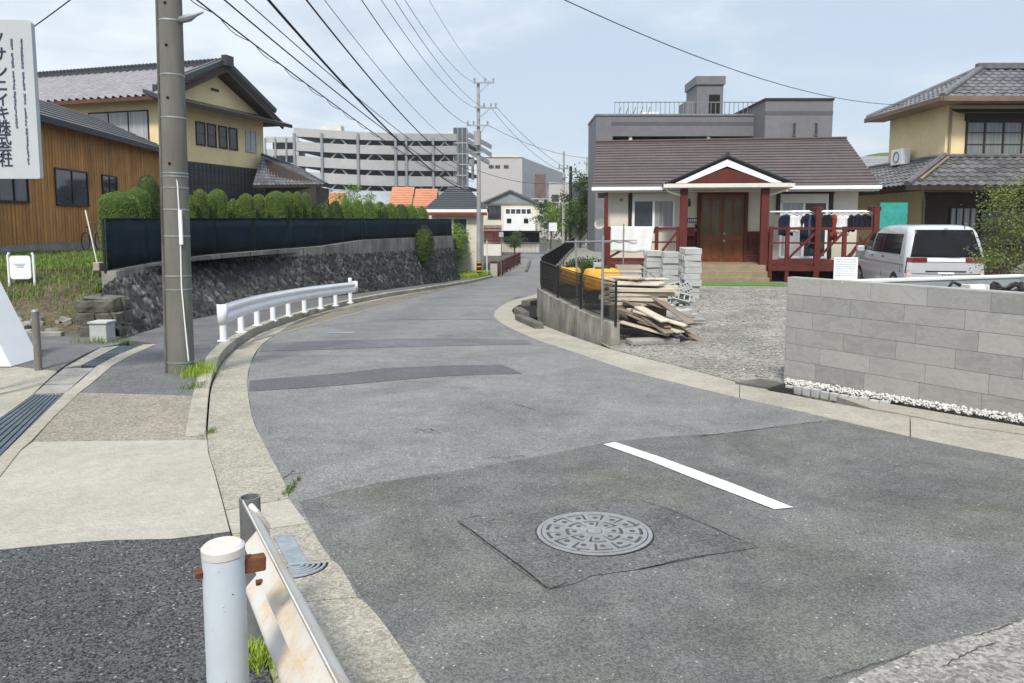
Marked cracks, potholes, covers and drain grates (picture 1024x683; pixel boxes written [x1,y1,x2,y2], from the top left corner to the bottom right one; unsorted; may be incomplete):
manhole cover [535,512,654,557]
drain grate [83,346,138,368]
crack [941,619,1020,667]
drain grate [0,394,63,456]
